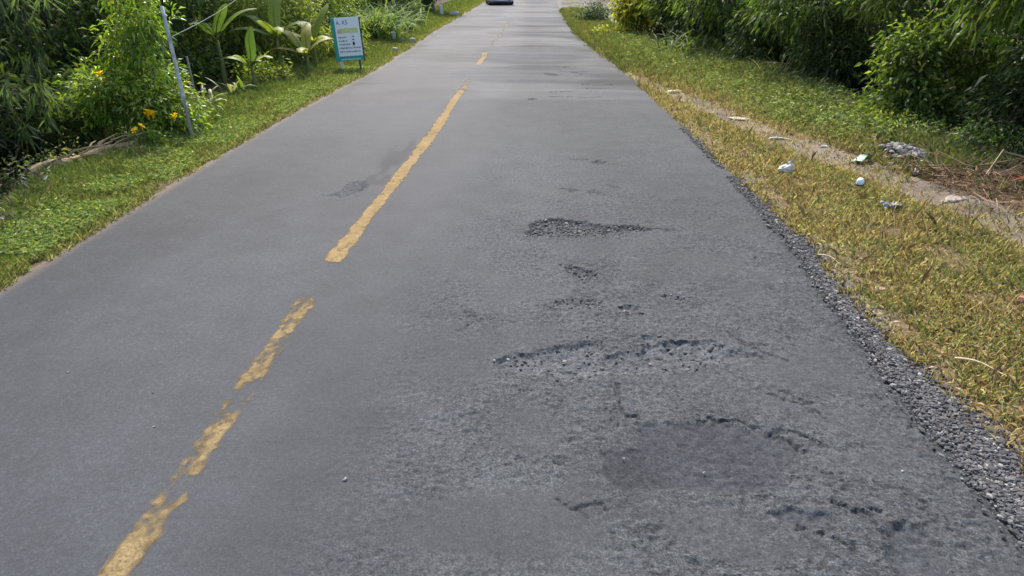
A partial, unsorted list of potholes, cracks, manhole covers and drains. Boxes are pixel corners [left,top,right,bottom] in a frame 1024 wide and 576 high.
pothole [559,263,600,280]
crack [795,500,891,552]
pothole [523,218,650,238]
pothole [491,332,752,384]
pothole [614,304,644,315]
crack [610,383,642,420]
crack [554,499,610,520]
crack [695,385,828,456]
pothole [549,298,604,311]
